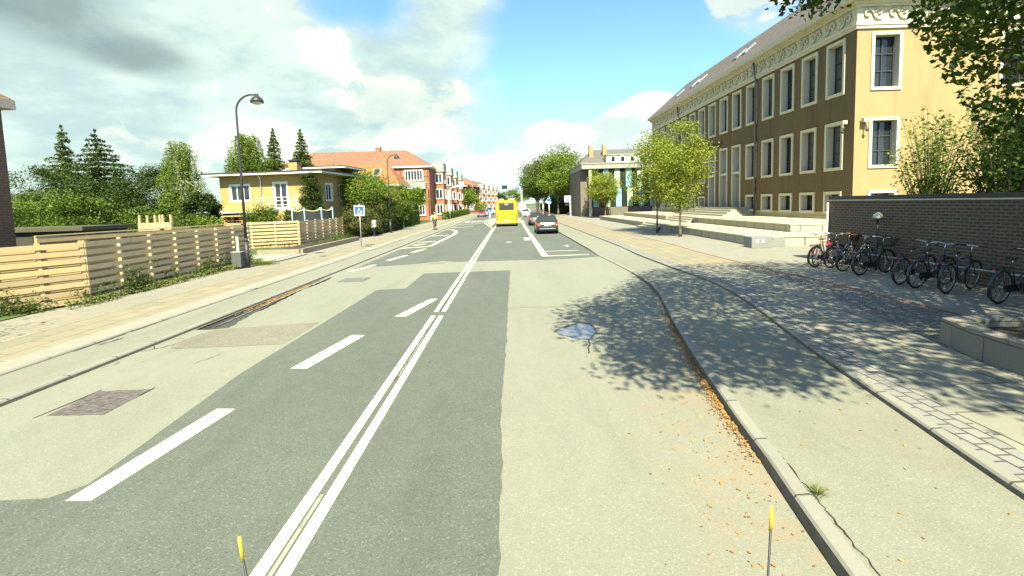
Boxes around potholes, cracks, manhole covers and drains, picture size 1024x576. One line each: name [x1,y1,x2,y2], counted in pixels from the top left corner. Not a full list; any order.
pothole [554,322,597,340]
